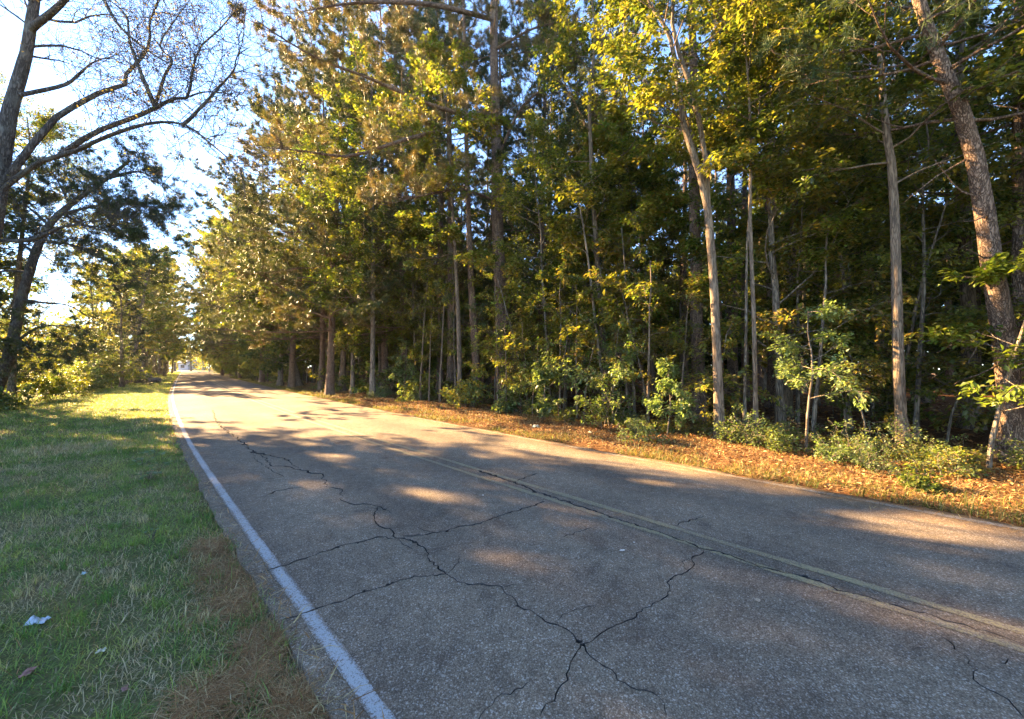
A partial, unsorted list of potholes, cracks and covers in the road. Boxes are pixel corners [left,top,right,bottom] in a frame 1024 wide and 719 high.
crack [212,411,1024,719]
